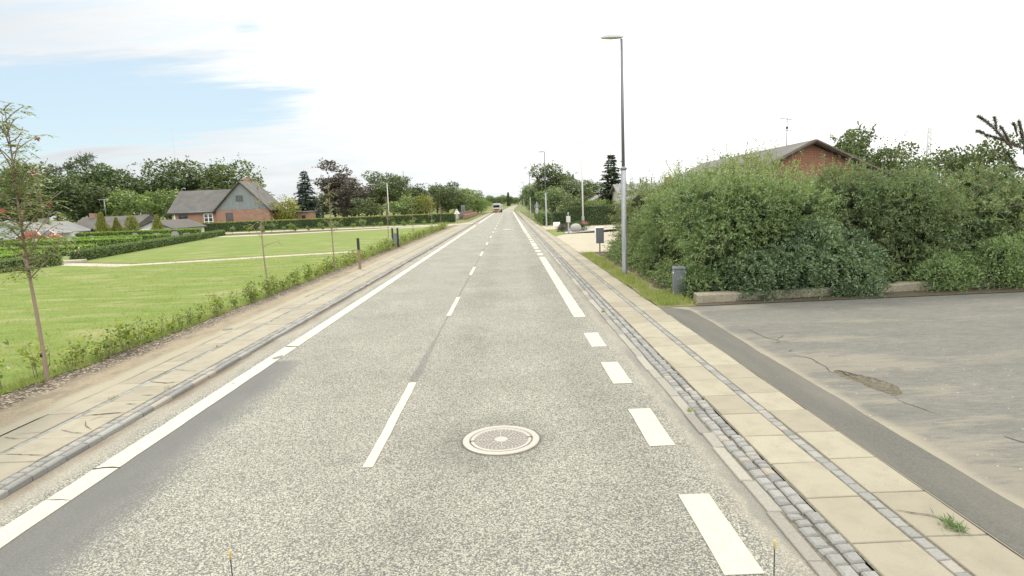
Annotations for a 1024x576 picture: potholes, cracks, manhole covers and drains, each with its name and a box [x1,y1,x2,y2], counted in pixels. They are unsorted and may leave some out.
crack [60,403,131,433]
manhole cover [463,425,540,455]
pothole [833,370,903,396]
